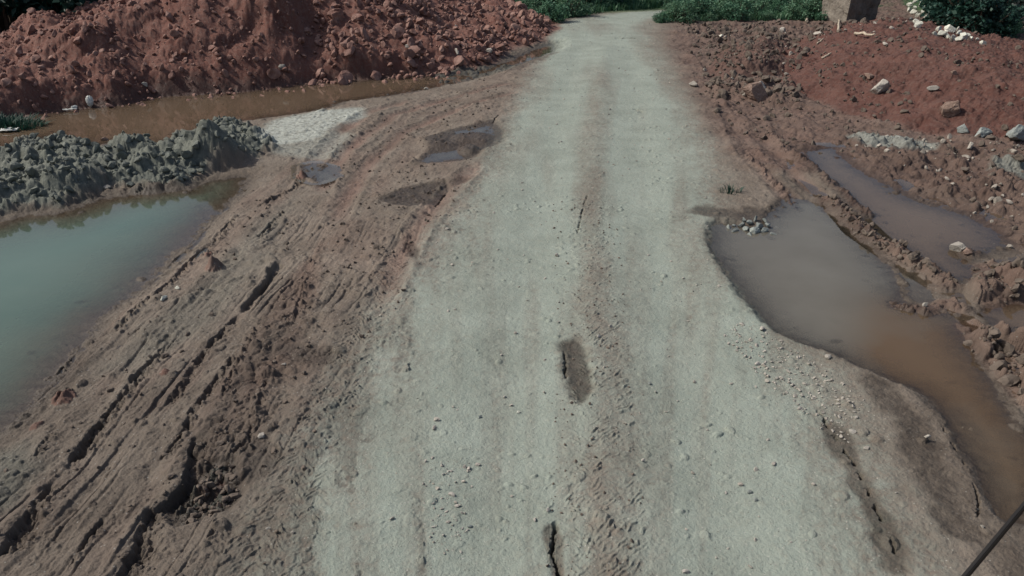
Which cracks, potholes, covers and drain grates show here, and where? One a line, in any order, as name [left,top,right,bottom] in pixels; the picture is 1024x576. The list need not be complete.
pothole [377,178,453,206]
pothole [702,192,1024,531]
crack [548,519,562,576]
pothole [415,119,506,163]
crack [577,193,589,233]
crack [817,408,901,556]
pothole [557,336,596,404]
